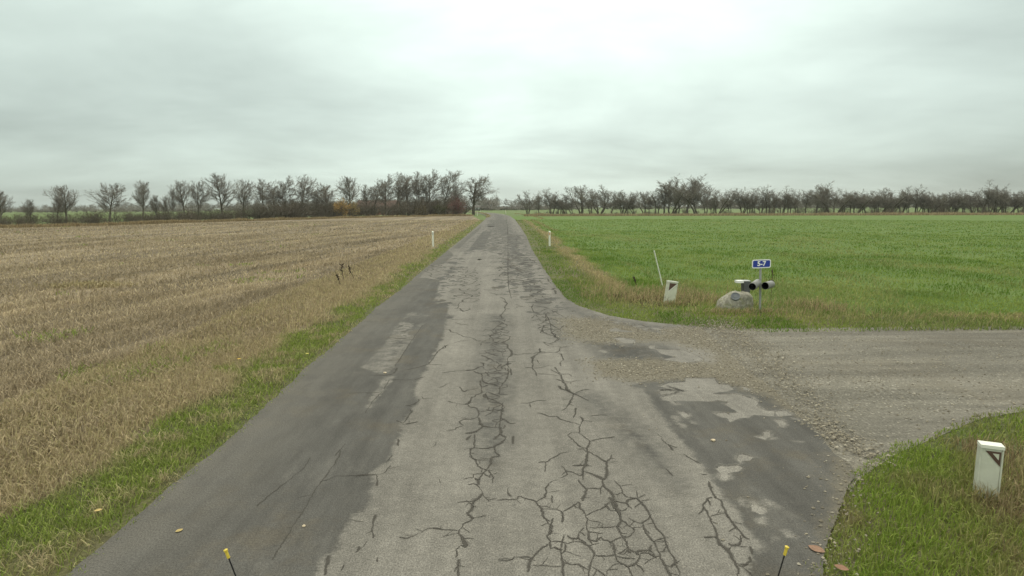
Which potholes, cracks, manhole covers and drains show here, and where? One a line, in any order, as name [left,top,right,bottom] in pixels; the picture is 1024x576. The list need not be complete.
crack [498,342,753,576]
crack [257,219,565,576]
